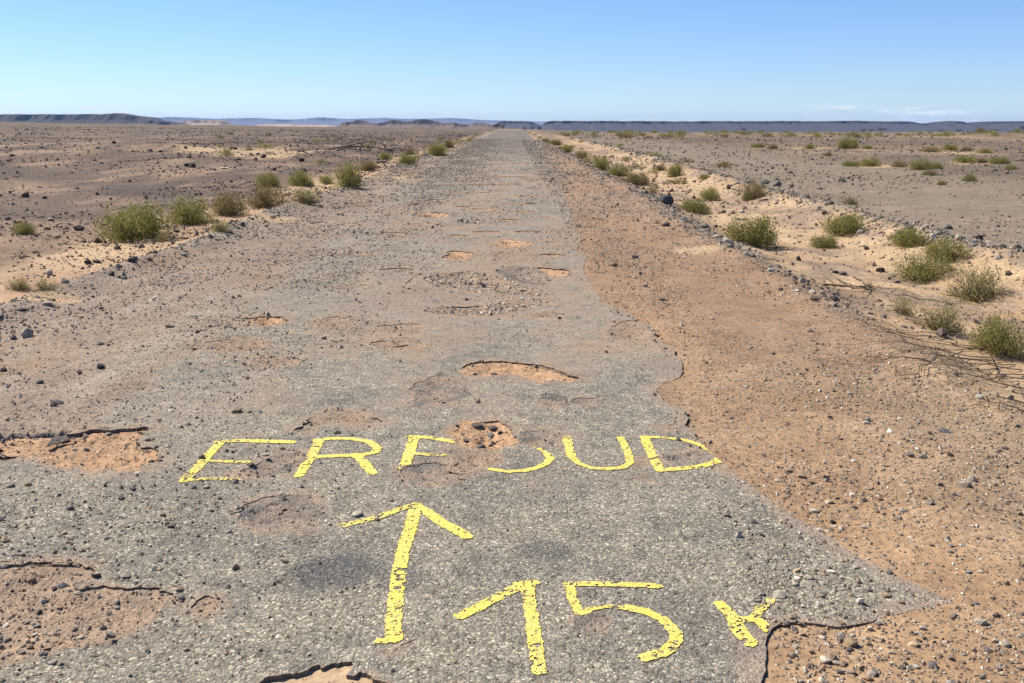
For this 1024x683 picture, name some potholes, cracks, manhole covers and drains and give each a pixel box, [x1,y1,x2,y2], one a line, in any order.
pothole [427,299,544,315]
pothole [191,597,218,618]
pothole [247,317,286,326]
pothole [265,665,373,683]
pothole [539,269,569,277]
pothole [0,430,158,471]
pothole [442,252,474,260]
pothole [230,494,329,534]
pothole [296,408,381,433]
pothole [458,362,576,383]
pothole [424,271,542,297]
